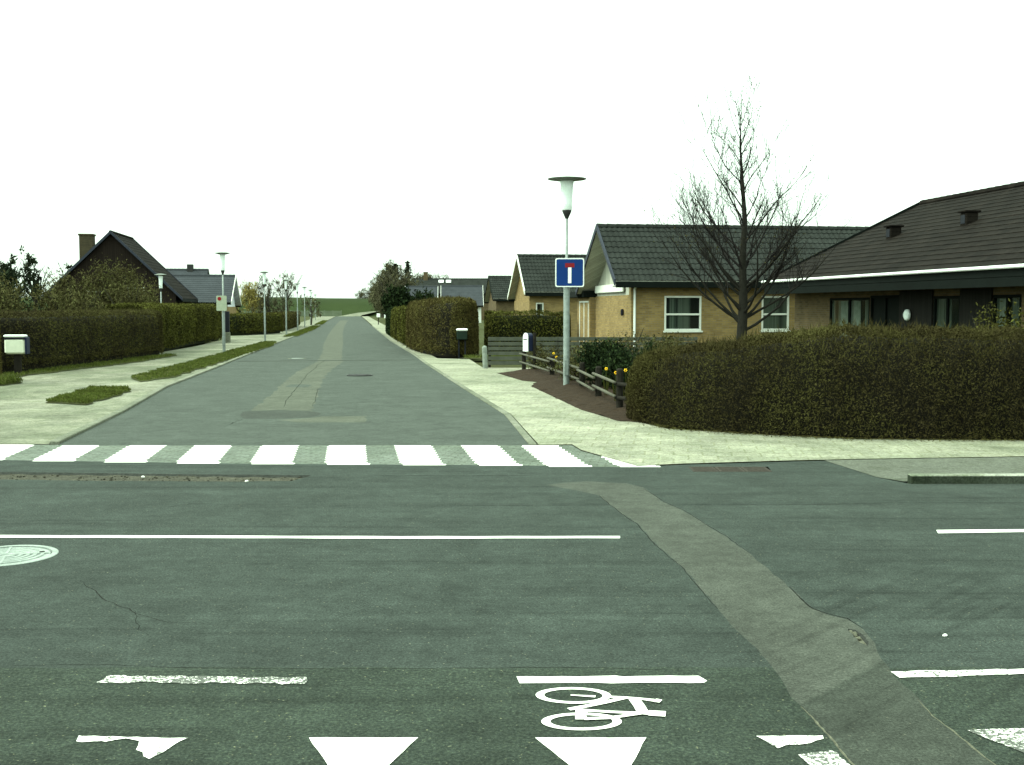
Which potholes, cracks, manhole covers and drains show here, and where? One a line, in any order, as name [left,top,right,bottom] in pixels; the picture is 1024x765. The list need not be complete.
pothole [848,629,869,645]
crack [284,360,347,406]
crack [80,580,166,633]
manhole cover [0,545,59,566]
